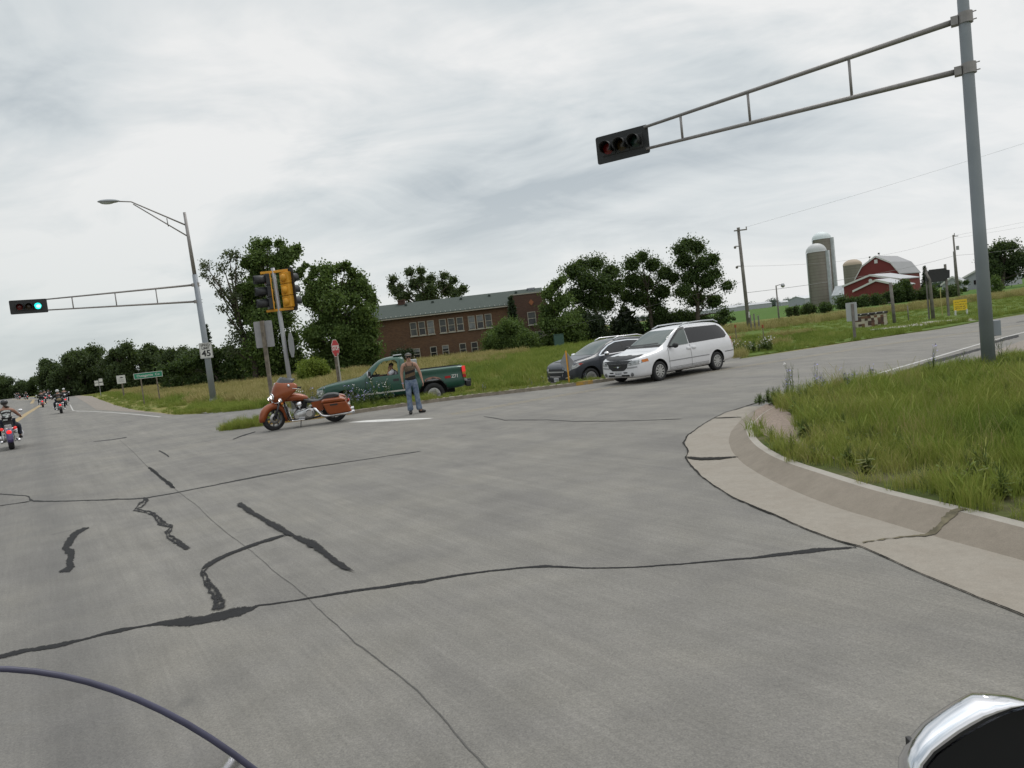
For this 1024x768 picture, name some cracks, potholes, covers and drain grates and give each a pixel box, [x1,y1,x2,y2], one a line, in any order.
crack [484,400,1024,615]
